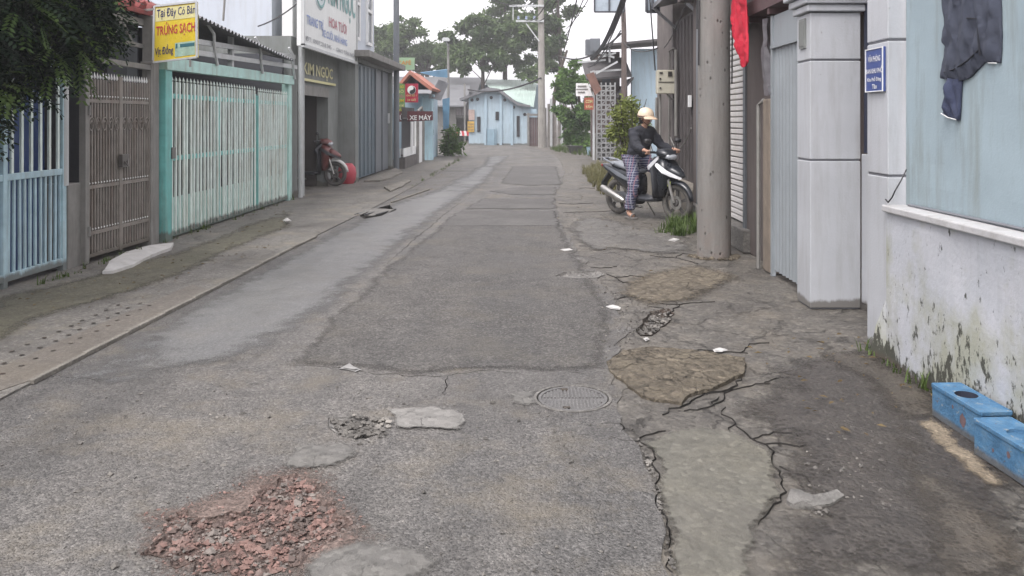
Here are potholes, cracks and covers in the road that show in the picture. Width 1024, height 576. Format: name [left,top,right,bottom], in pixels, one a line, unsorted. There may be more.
pothole [636,308,674,336]
crack [284,364,509,393]
manhole cover [534,385,612,413]
pothole [328,416,385,439]
crack [601,342,816,572]
